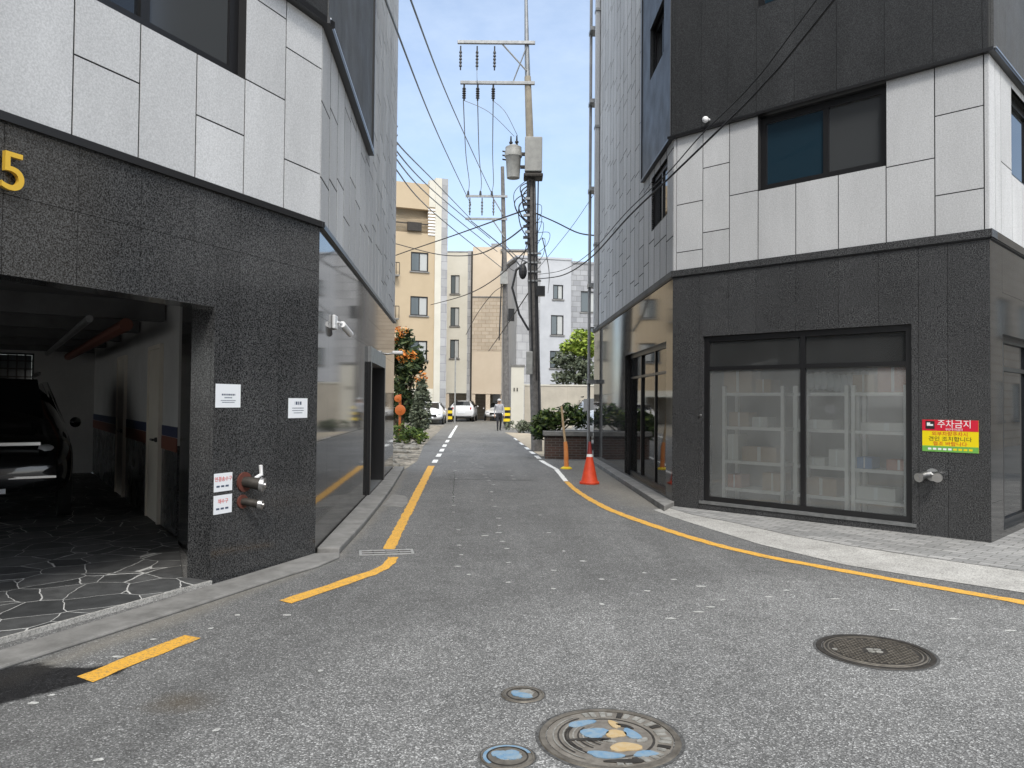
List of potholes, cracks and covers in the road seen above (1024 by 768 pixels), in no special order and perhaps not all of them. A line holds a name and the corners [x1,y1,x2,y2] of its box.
manhole cover [535,708,686,768]
manhole cover [813,634,940,671]
manhole cover [500,686,546,703]
manhole cover [478,744,537,768]
